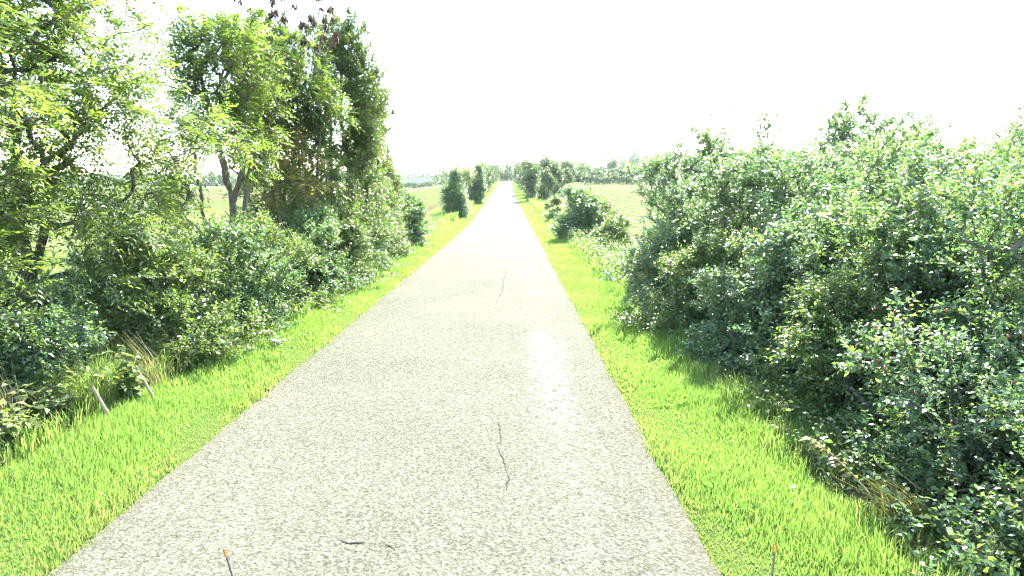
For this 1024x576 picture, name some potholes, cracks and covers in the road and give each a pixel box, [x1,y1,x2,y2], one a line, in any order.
crack [498,423,510,487]
